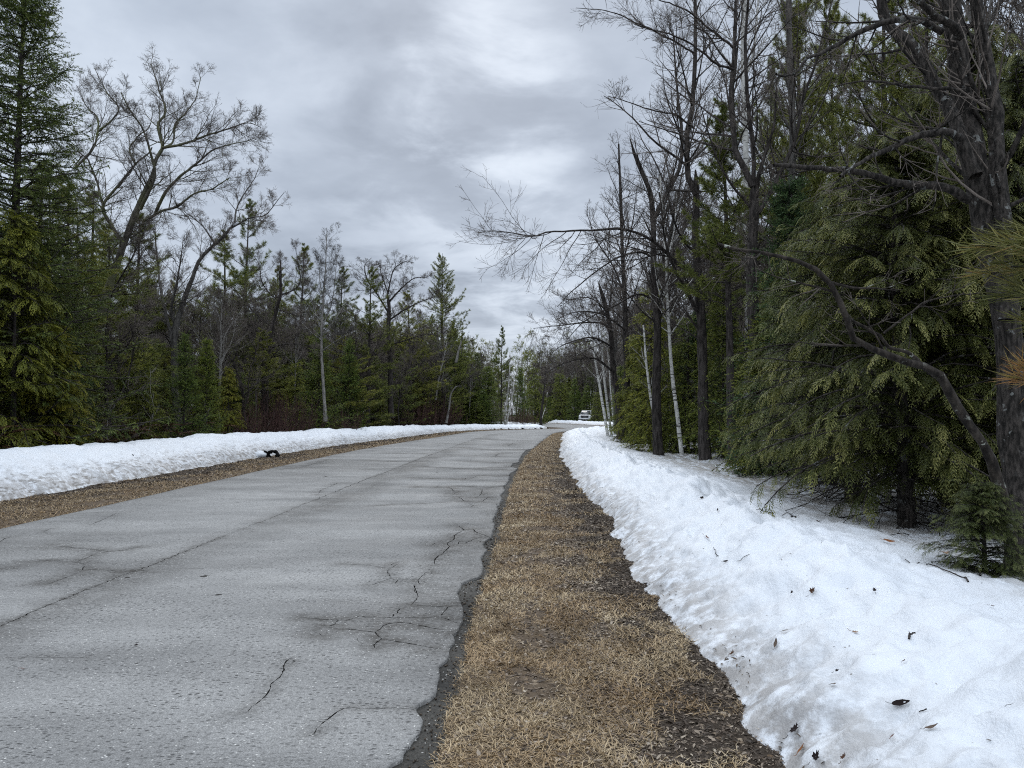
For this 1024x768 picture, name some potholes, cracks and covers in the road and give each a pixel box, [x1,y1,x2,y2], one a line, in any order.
crack [378,440,511,507]
crack [1,512,138,582]
crack [304,526,488,650]
crack [248,658,295,711]
crack [314,707,413,734]
